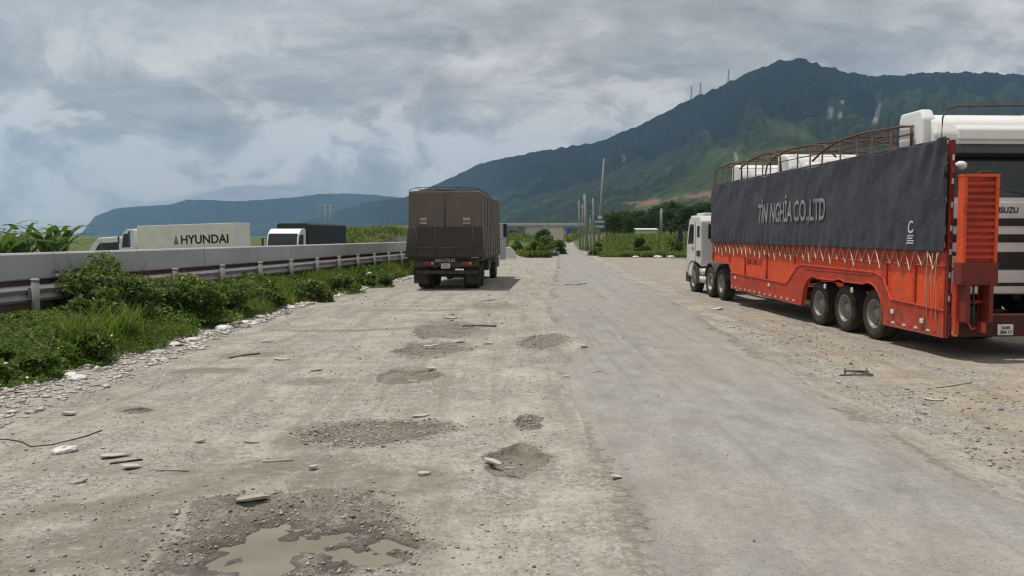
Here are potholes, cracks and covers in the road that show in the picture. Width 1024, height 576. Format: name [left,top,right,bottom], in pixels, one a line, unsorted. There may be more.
pothole [478,441,556,482]
pothole [513,414,543,430]
pothole [134,487,448,576]
pothole [409,322,489,340]
pothole [288,419,466,449]
pothole [517,334,569,349]
pothole [373,369,448,385]
pothole [388,342,471,357]
